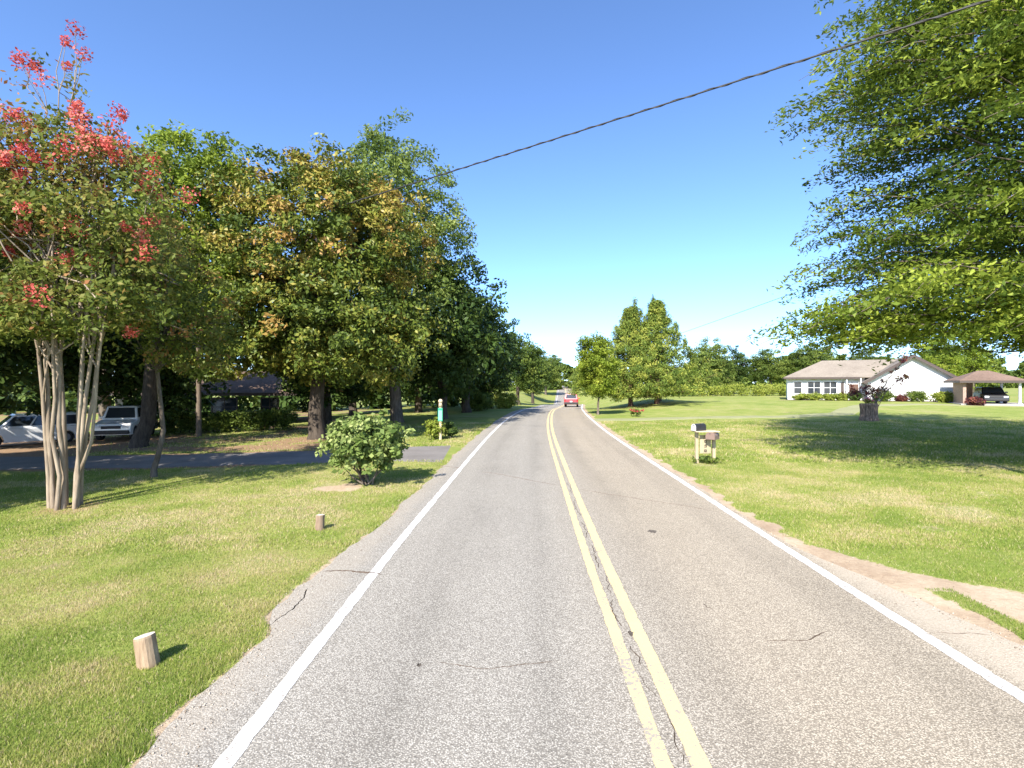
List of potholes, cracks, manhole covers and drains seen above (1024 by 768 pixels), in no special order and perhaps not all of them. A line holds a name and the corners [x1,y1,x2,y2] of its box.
crack [769,631,827,641]
crack [440,660,559,669]
